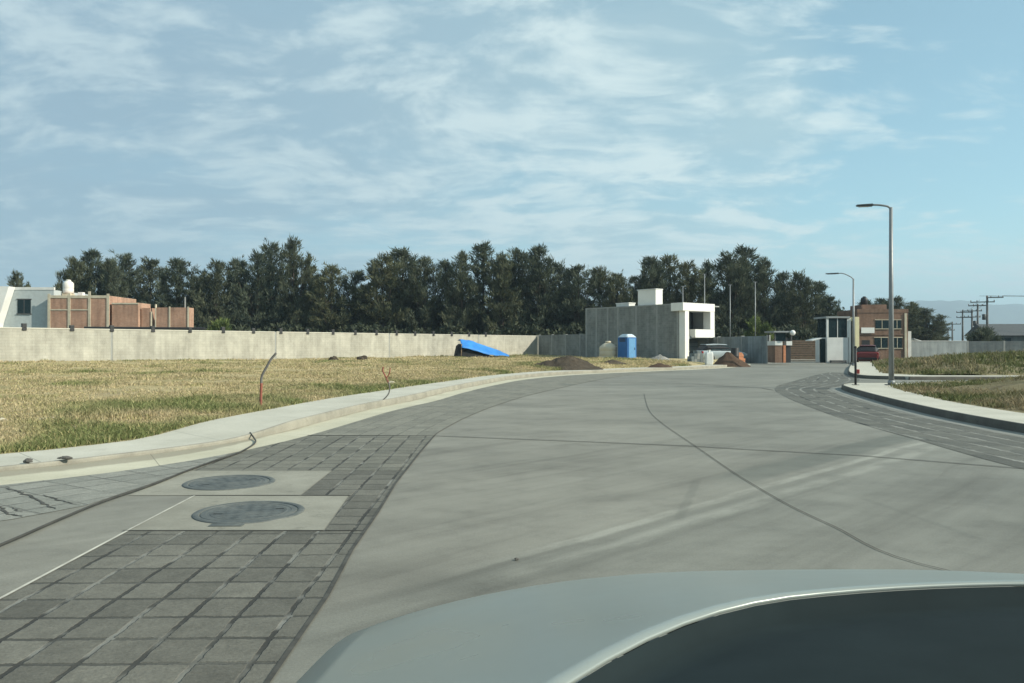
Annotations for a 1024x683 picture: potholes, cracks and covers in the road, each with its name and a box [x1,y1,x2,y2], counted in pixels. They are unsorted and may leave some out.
manhole cover [192,501,305,527]
crack [0,487,80,516]
manhole cover [182,475,275,491]
